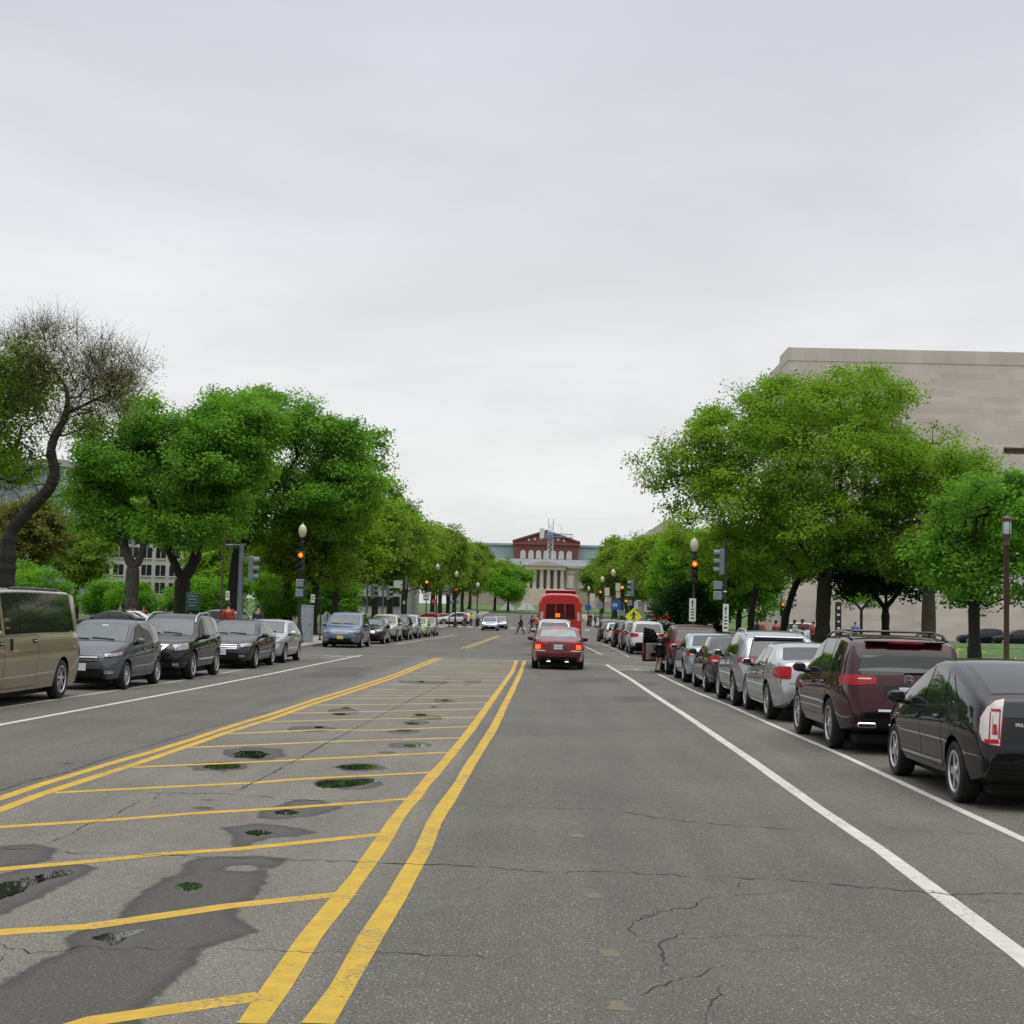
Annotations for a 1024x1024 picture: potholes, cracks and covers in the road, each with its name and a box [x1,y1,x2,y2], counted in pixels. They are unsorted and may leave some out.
crack [47,679,978,843]
crack [641,931,853,1024]
crack [7,848,1021,937]
